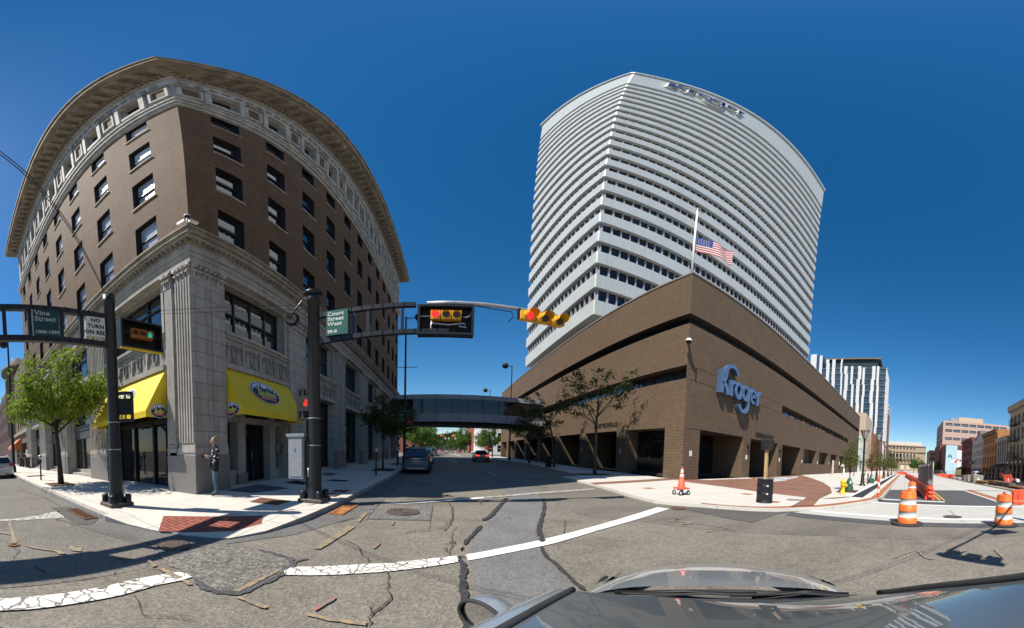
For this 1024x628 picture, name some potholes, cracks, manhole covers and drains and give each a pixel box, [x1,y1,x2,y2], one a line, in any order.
drain grate [66,508,98,520]
crack [366,570,392,628]
manhole cover [157,540,191,551]
manhole cover [387,508,420,516]
drain grate [329,504,358,515]
